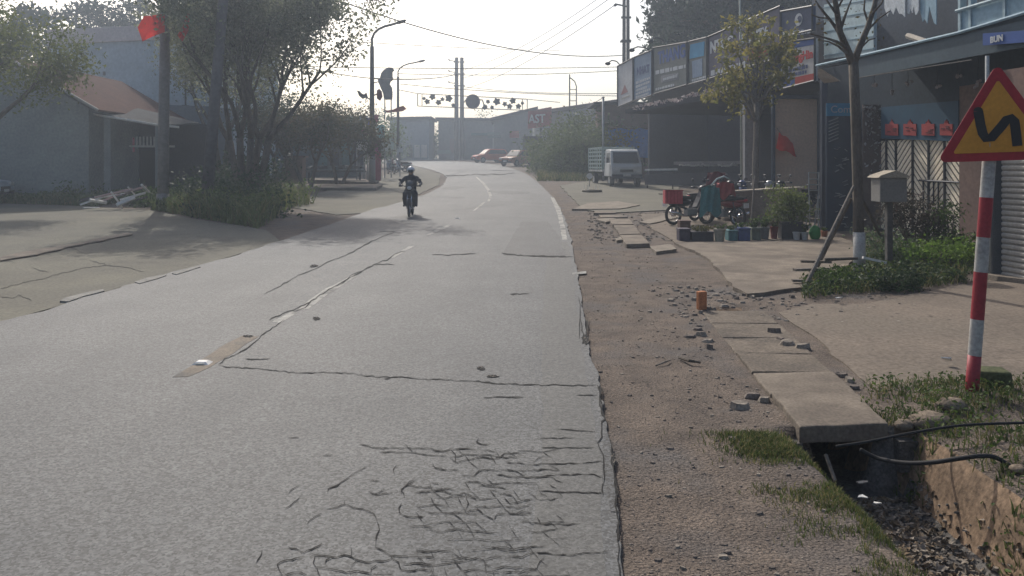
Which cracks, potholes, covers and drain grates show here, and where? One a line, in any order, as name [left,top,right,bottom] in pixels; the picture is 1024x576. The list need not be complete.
crack [256,385,621,576]
crack [0,248,144,300]
crack [219,251,402,364]
crack [579,300,588,338]
